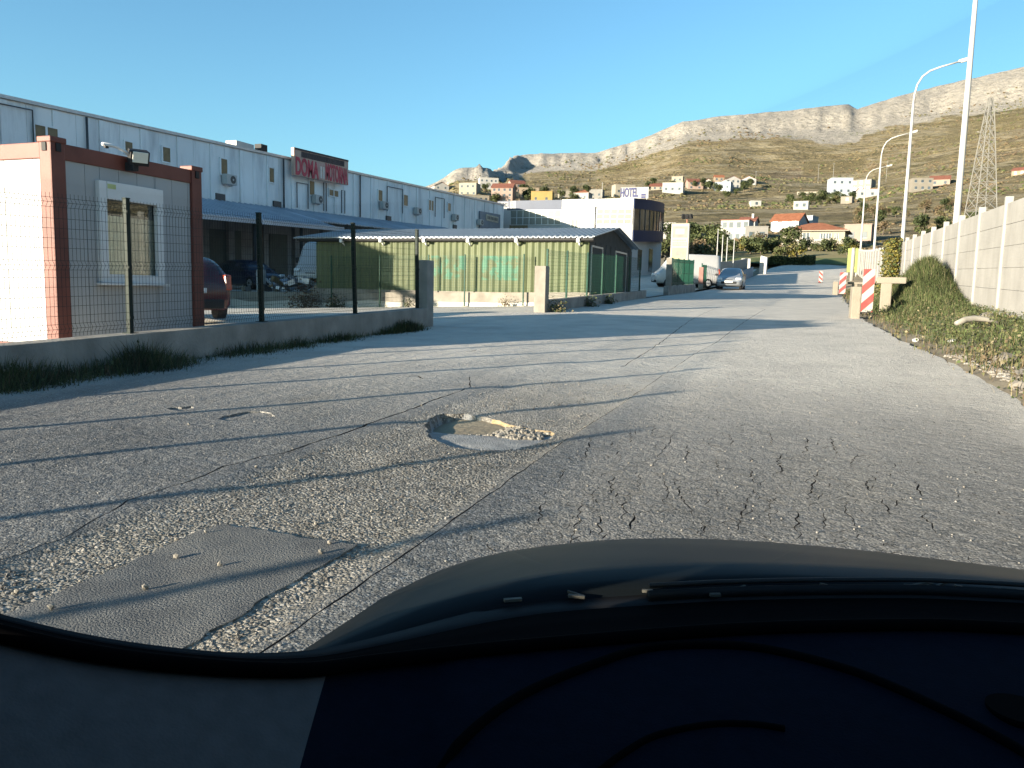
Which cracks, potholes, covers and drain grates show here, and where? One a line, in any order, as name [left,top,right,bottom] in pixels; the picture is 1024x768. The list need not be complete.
pothole [424,413,554,451]
